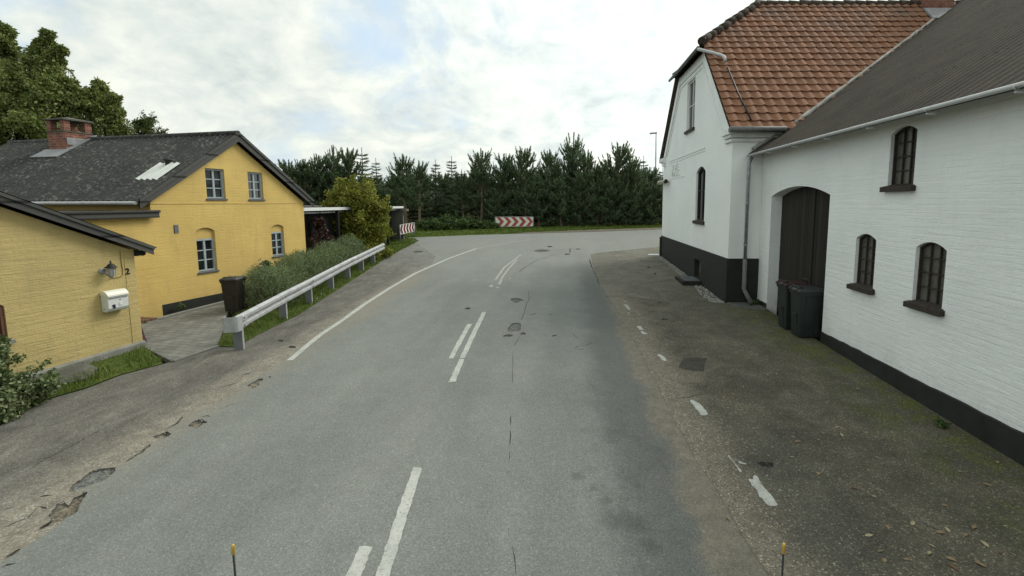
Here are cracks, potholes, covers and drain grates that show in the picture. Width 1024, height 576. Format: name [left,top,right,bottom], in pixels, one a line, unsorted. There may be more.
crack [125,417,183,462]
pothole [68,467,115,492]
pothole [48,494,86,523]
